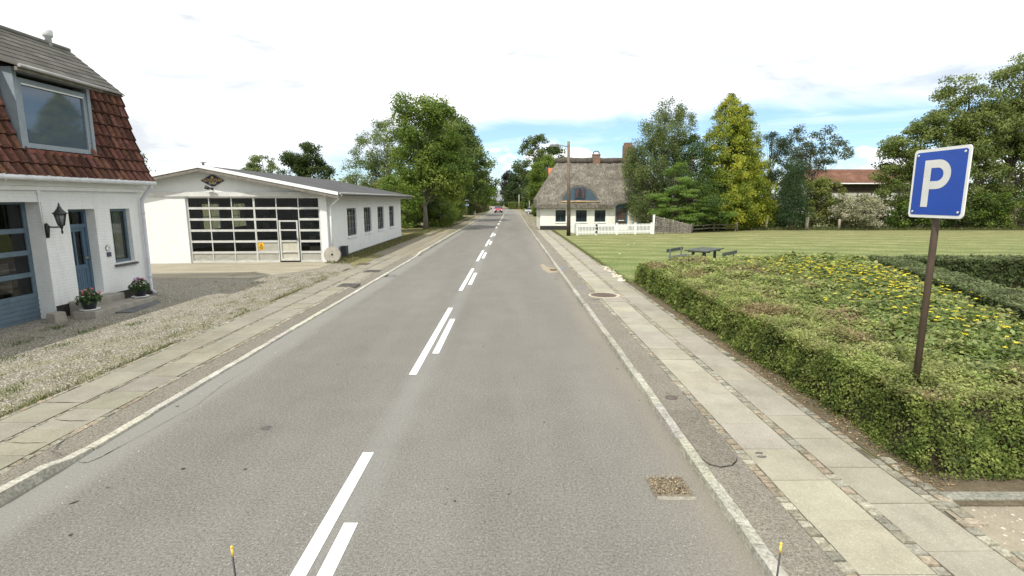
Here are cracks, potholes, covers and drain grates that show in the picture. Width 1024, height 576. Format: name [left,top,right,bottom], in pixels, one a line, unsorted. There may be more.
drain grate [643,474,697,501]
